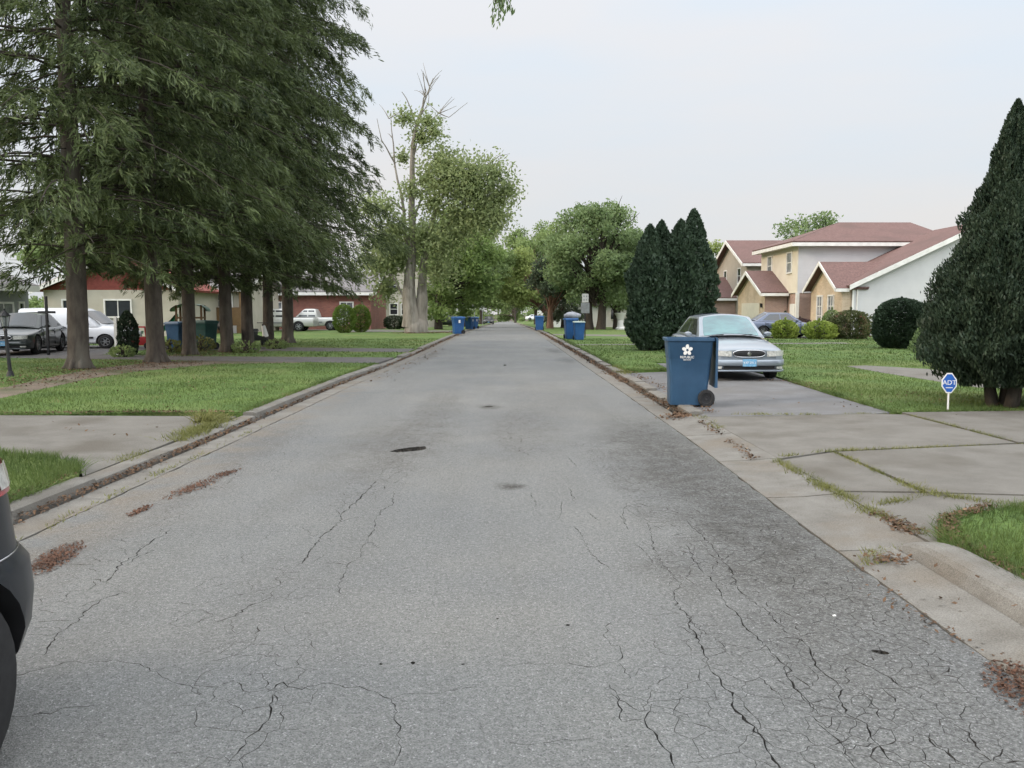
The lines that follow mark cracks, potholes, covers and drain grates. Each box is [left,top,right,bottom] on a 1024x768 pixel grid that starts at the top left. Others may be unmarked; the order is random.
crack [22,390,470,768]
crack [489,442,1024,768]
